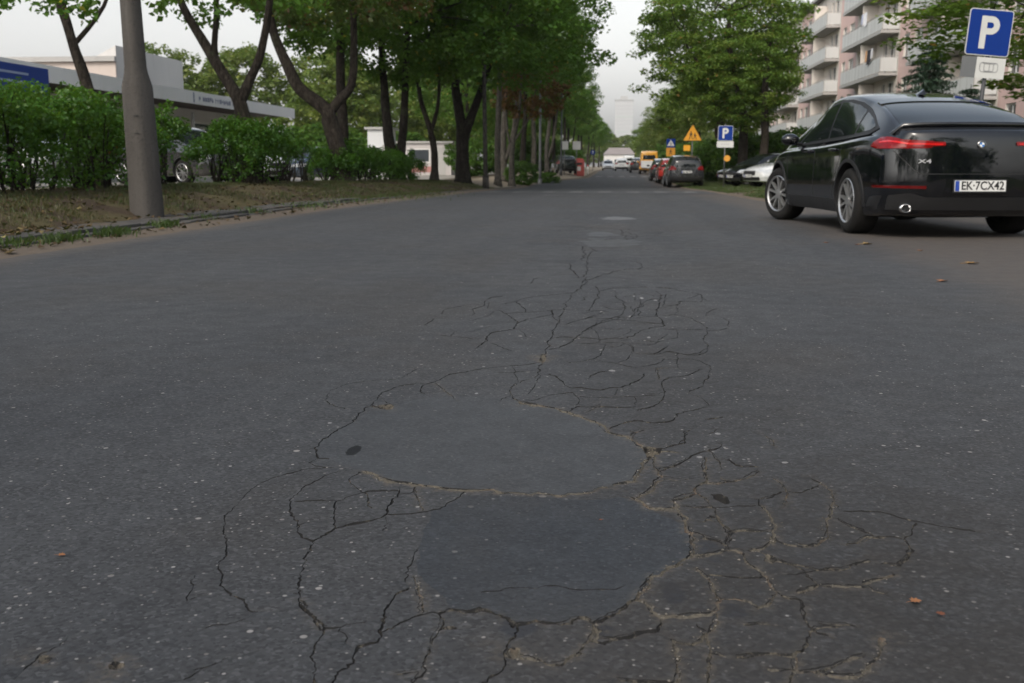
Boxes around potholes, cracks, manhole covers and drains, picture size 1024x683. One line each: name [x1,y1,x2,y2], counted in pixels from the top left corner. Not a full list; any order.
crack [178,658,226,682]
crack [425,227,730,355]
crack [206,295,975,683]
